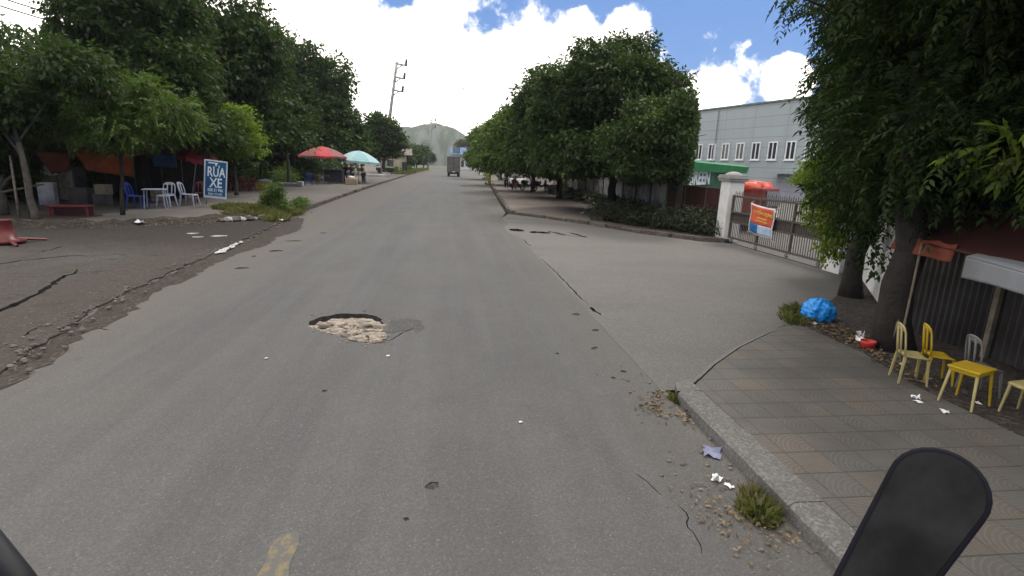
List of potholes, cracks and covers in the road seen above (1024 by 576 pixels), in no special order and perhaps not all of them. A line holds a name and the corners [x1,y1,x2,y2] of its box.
crack [524,240,601,315]
pothole [294,310,393,349]
crack [681,508,702,555]
crack [0,246,98,336]
